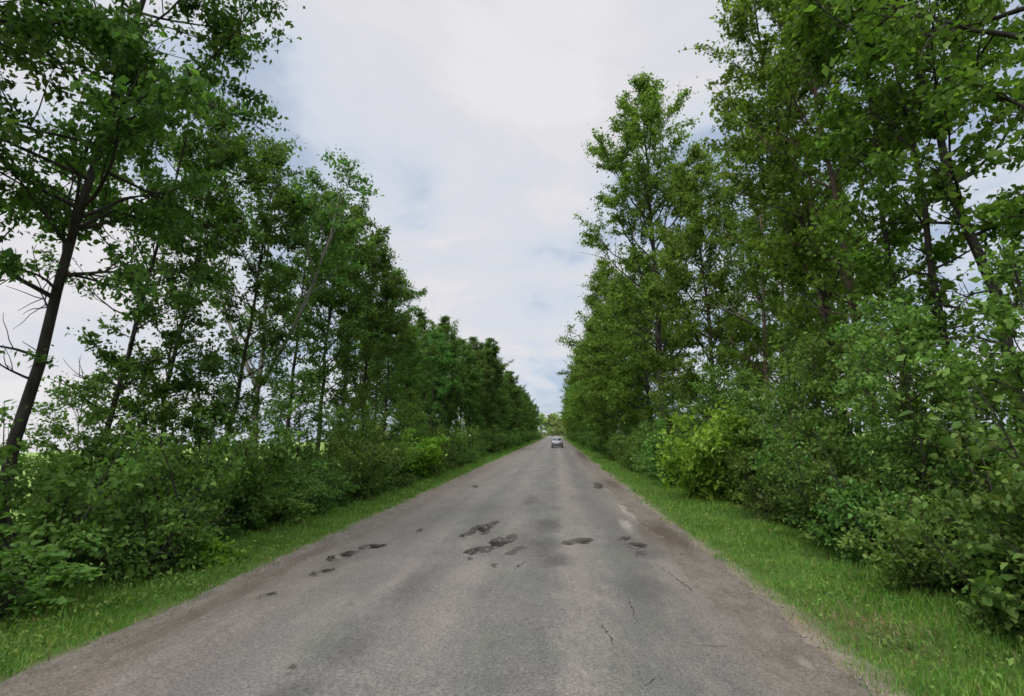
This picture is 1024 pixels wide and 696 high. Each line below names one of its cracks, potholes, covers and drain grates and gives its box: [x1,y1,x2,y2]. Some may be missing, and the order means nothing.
pothole [625,542,648,550]
pothole [458,520,500,538]
pothole [325,550,359,561]
pothole [463,534,518,555]
